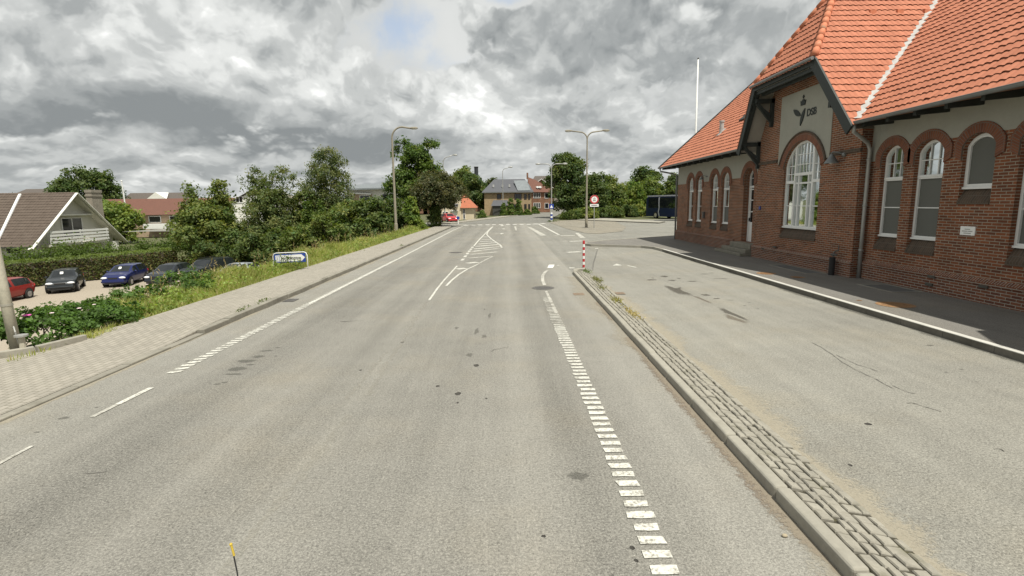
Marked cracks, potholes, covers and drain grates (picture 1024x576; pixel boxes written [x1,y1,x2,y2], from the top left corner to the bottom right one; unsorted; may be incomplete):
crack [816,344,939,411]
